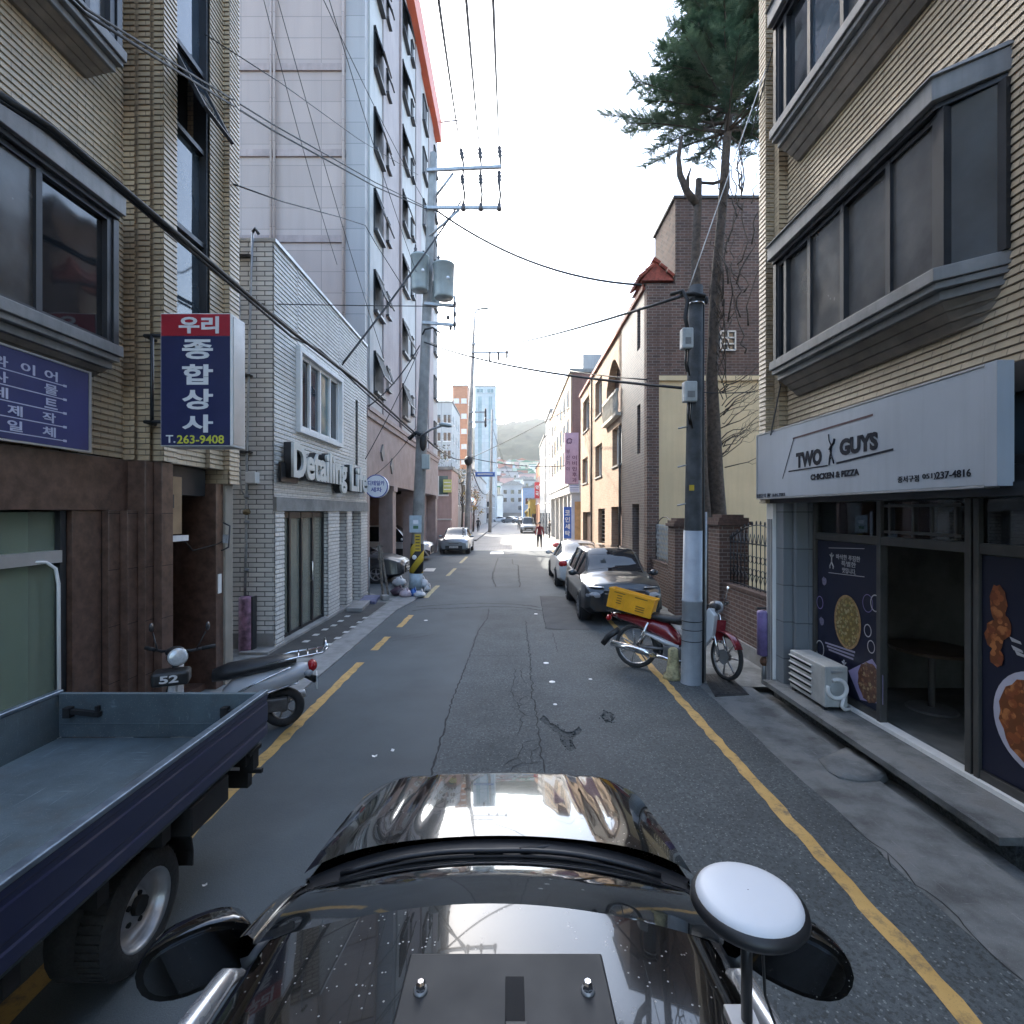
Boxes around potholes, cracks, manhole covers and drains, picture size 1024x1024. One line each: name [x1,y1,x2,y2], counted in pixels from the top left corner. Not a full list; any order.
pothole [539,715,582,752]
crack [412,558,580,773]
pothole [599,710,615,723]
